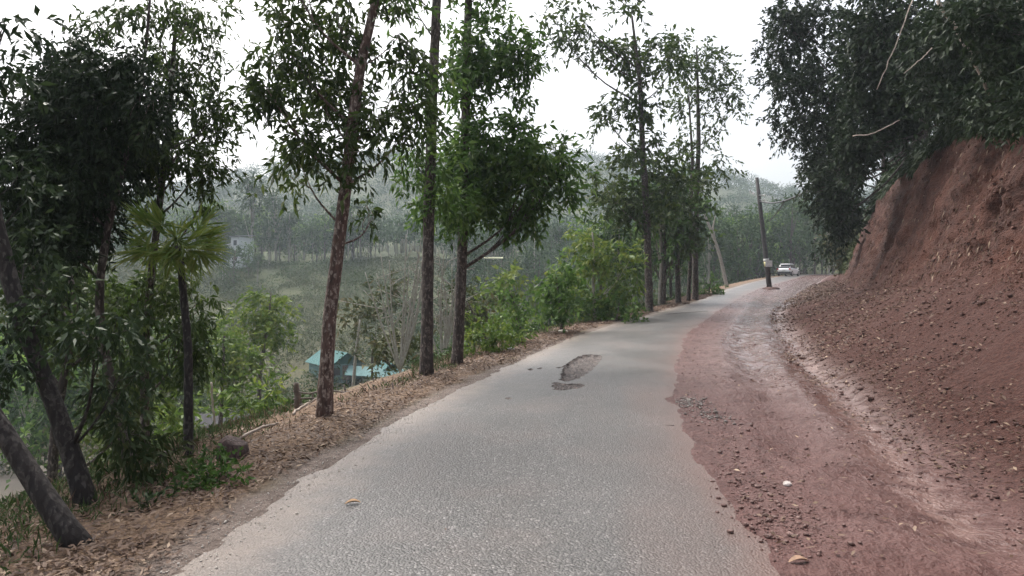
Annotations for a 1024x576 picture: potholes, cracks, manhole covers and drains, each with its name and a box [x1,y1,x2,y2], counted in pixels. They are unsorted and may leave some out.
pothole [558,354,602,381]
pothole [550,382,585,390]
